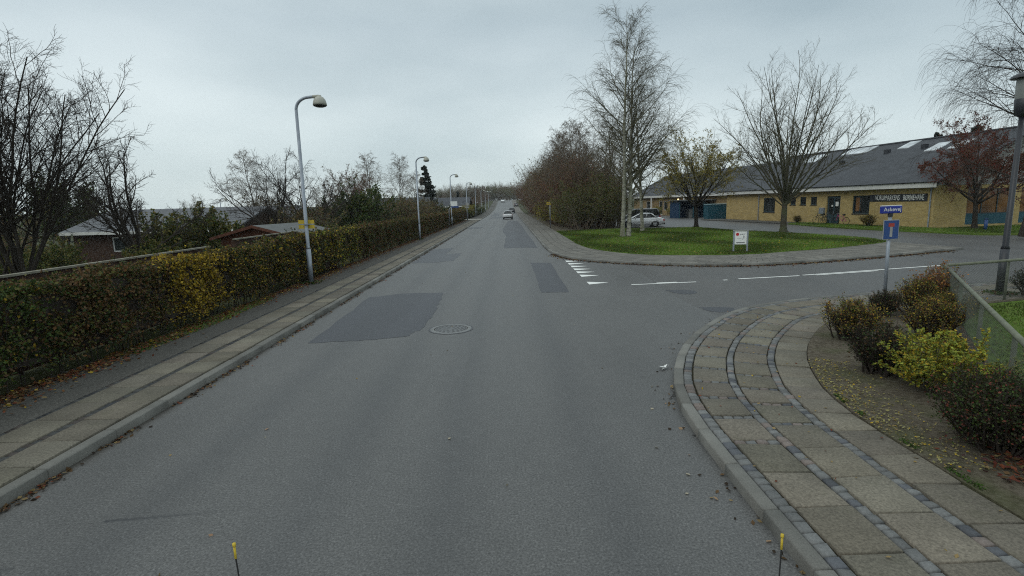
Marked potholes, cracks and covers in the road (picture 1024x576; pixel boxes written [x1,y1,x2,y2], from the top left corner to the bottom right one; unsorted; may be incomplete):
manhole cover [429,324,473,334]
